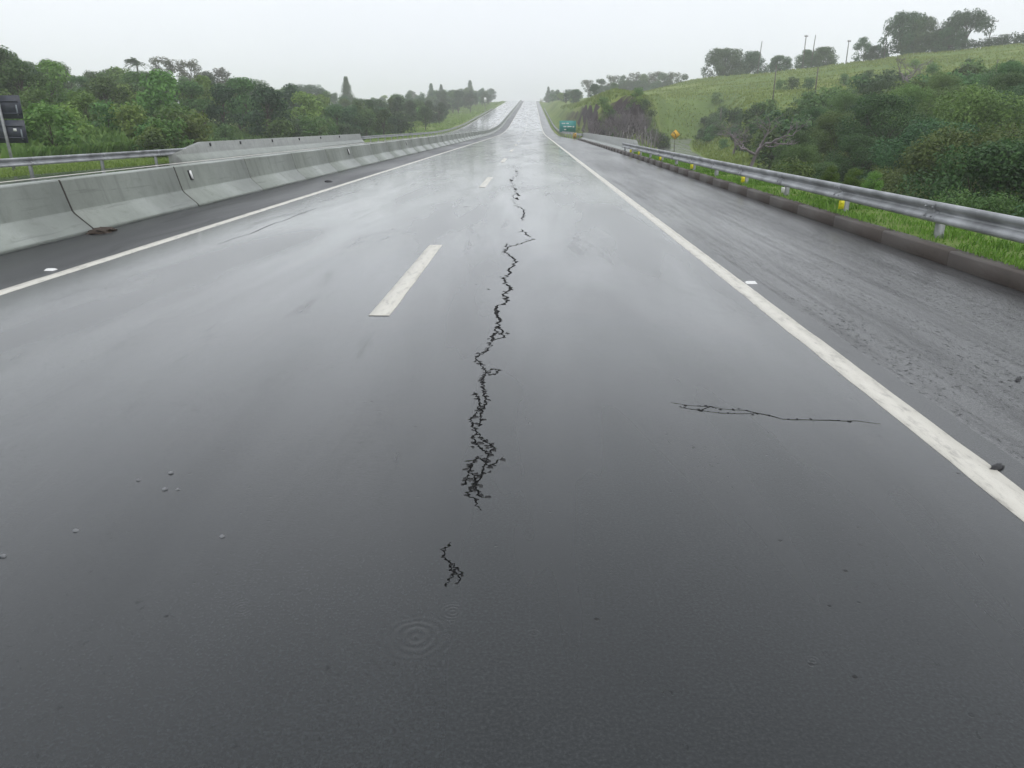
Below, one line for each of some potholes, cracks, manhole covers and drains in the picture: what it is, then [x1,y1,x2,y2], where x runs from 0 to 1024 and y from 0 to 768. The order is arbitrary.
crack [680,405,852,423]
crack [461,171,535,510]
crack [442,542,464,587]
